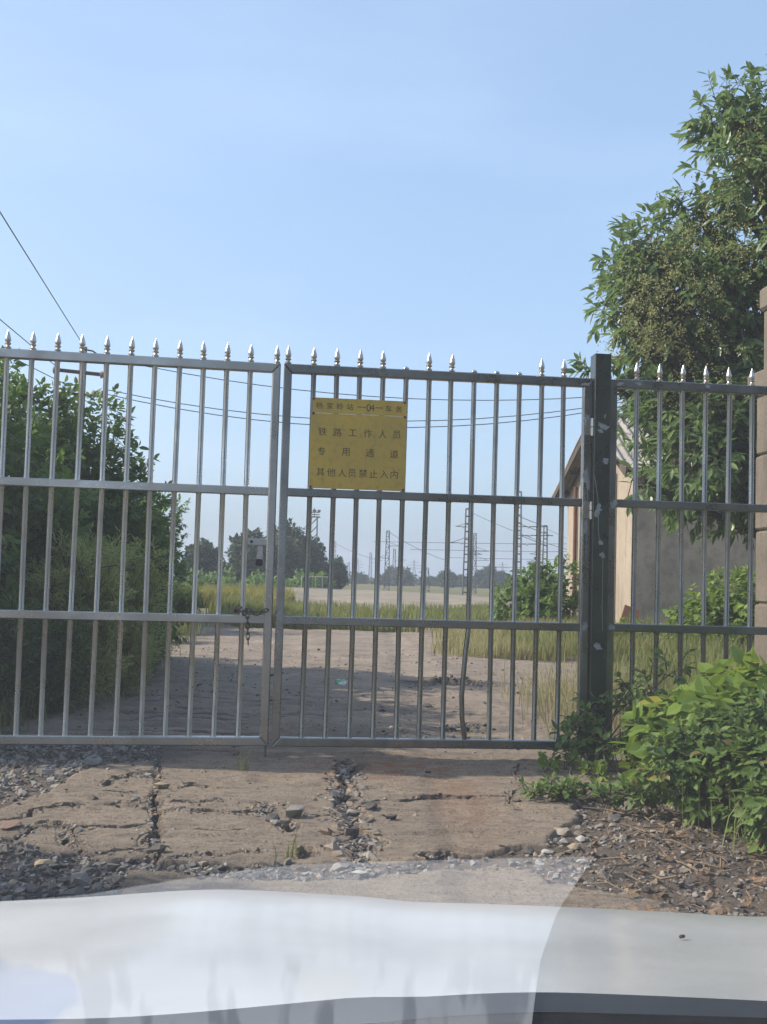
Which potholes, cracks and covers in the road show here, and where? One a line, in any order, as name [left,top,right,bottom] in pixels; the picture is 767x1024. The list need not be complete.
pothole [56,832,81,847]
crack [373,762,526,811]
crack [0,772,345,860]
